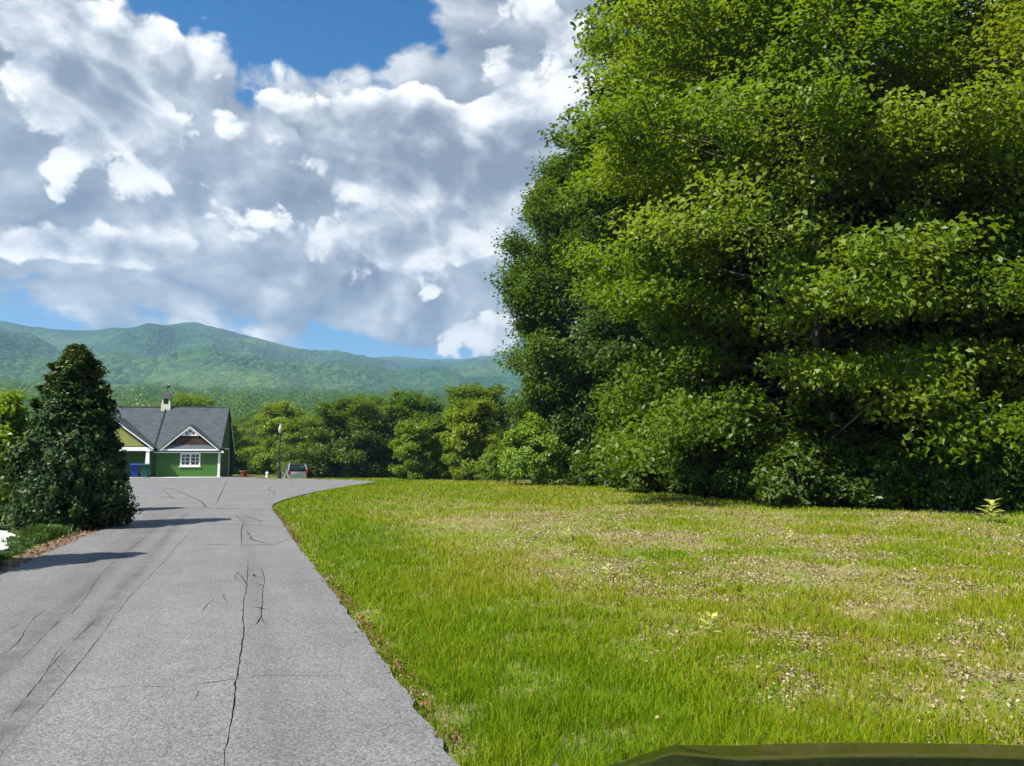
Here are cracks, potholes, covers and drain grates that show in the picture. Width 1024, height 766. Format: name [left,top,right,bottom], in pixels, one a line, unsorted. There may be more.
crack [85,567,346,766]
crack [1,482,289,730]
